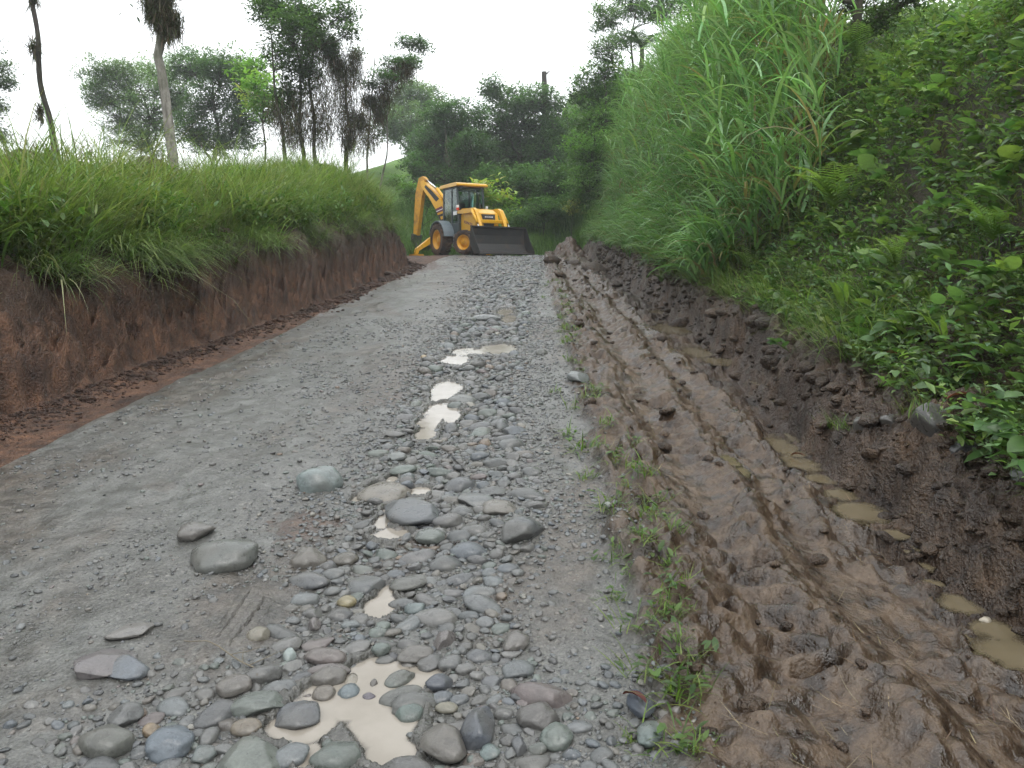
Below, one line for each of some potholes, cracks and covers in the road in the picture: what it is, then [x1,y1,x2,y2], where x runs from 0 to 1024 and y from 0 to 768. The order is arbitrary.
pothole [434,346,483,367]
pothole [357,579,402,626]
pothole [249,646,452,768]
pothole [422,375,471,406]
pothole [410,399,469,443]
pothole [347,472,434,549]
pothole [463,340,528,359]
